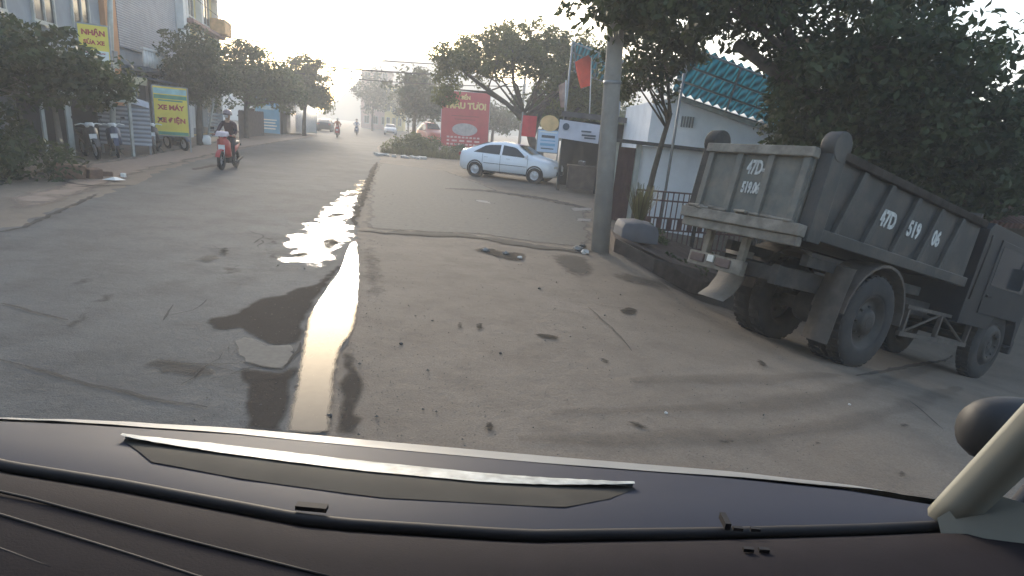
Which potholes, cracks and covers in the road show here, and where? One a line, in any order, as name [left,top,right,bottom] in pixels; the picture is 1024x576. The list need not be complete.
pothole [476,248,524,259]
crack [588,307,632,351]
